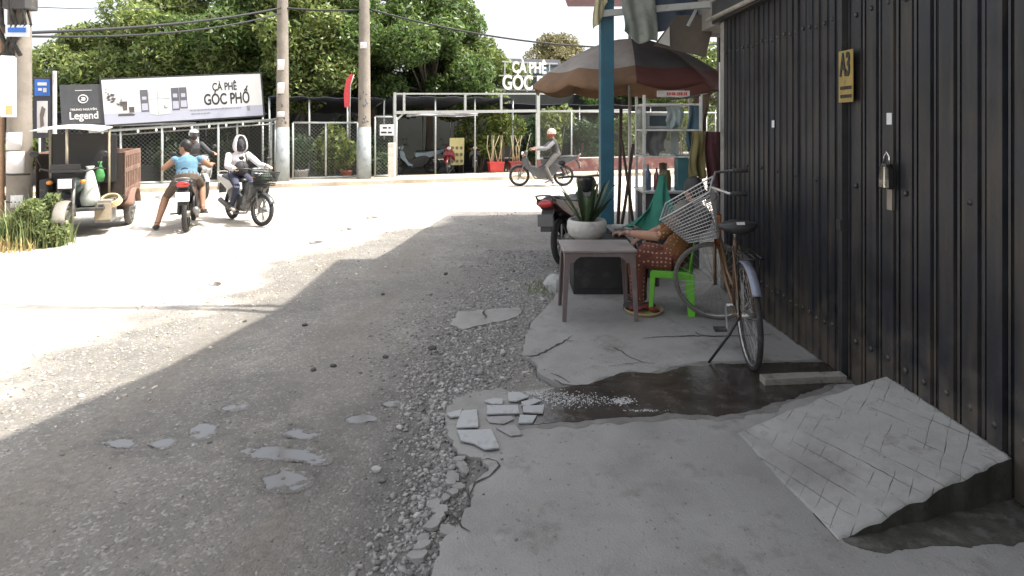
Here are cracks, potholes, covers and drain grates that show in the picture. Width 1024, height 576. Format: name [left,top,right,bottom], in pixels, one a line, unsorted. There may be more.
crack [448,458,501,531]
pothole [254,467,315,493]
pothole [279,428,326,441]
pothole [215,400,251,413]
pothole [186,419,221,441]
crack [520,335,573,356]
pothole [101,436,138,449]
pothole [230,442,335,466]
pothole [146,436,178,450]
pothole [343,411,381,424]
